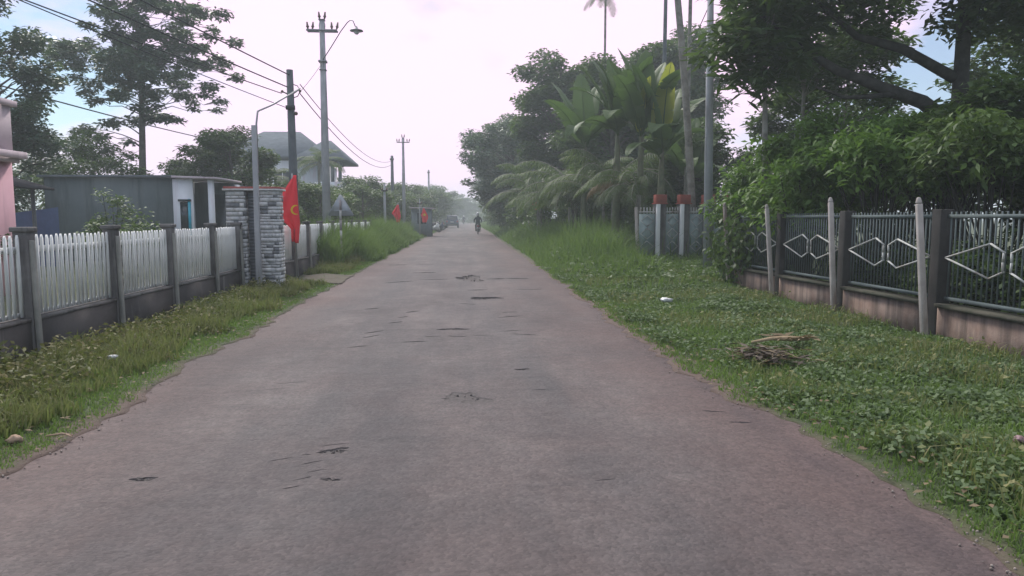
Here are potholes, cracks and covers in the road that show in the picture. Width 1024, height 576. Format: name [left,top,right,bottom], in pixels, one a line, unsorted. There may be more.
crack [268,443,345,489]
pothole [441,392,495,405]
